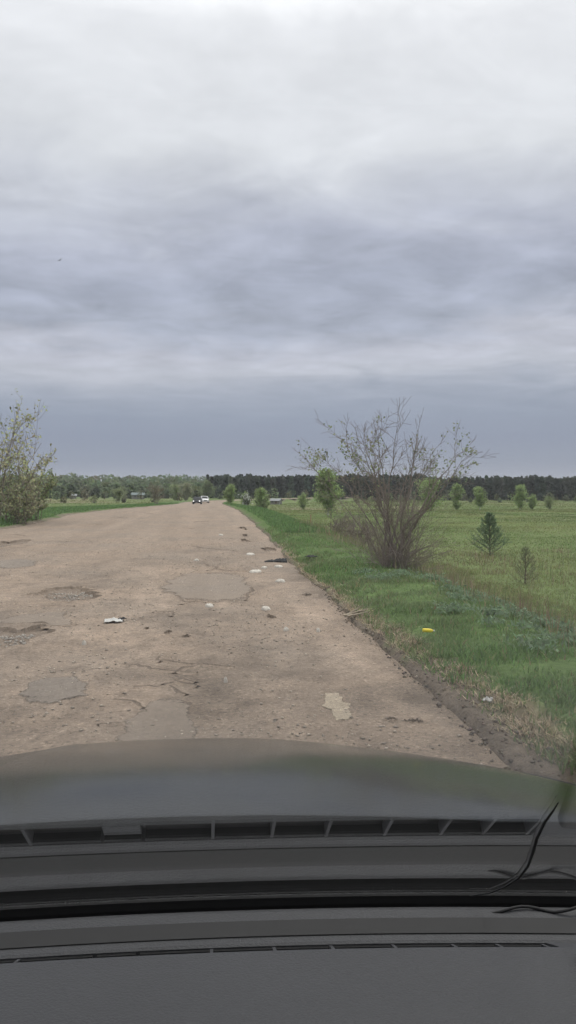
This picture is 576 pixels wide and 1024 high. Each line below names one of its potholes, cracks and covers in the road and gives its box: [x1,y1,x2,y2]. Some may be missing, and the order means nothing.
pothole [19,586,108,604]
pothole [0,624,67,650]
pothole [0,539,36,548]
crack [98,656,235,728]
